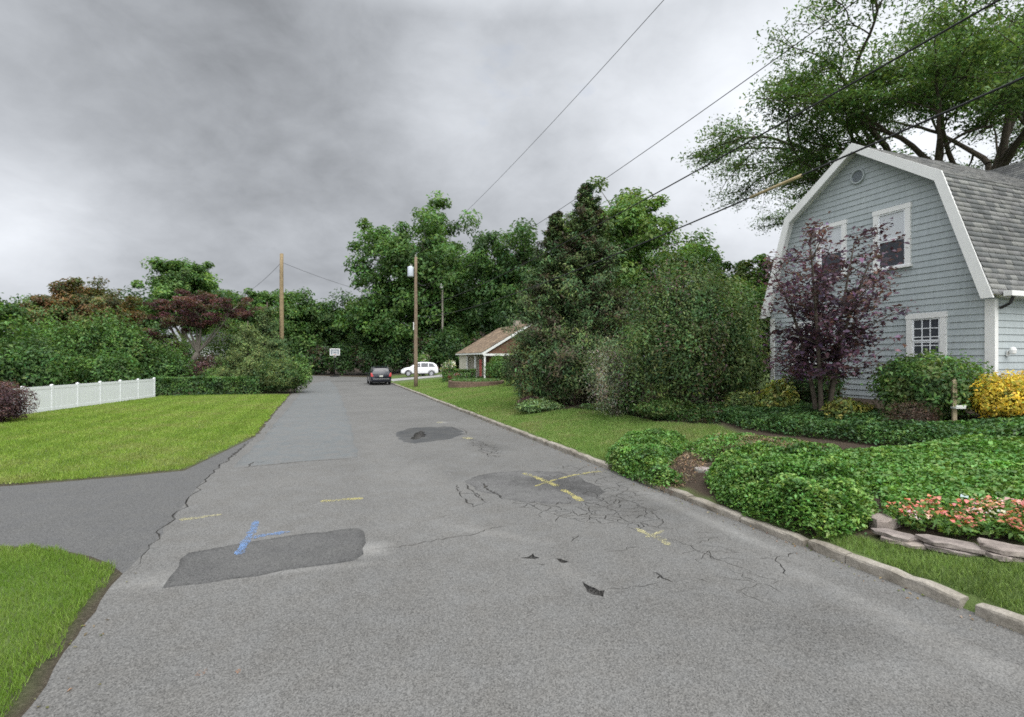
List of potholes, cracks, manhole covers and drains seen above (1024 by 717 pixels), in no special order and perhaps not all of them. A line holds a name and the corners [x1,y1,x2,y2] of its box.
crack [609,572,672,589]
crack [456,465,672,531]
crack [386,526,501,548]
pothole [583,582,605,597]
crack [132,438,354,568]
crack [669,532,796,605]
